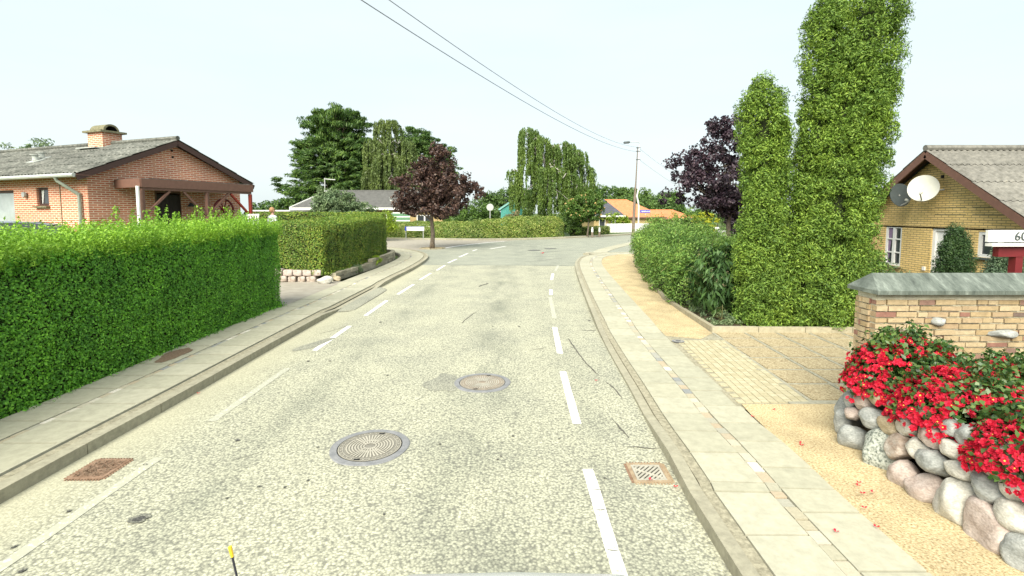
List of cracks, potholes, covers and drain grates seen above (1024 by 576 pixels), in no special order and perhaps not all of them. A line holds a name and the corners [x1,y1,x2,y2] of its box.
manhole cover [454,373,511,393]
manhole cover [329,429,410,466]
crack [613,420,655,449]
crack [568,330,622,398]
drain grate [64,458,134,481]
drain grate [624,462,675,485]
